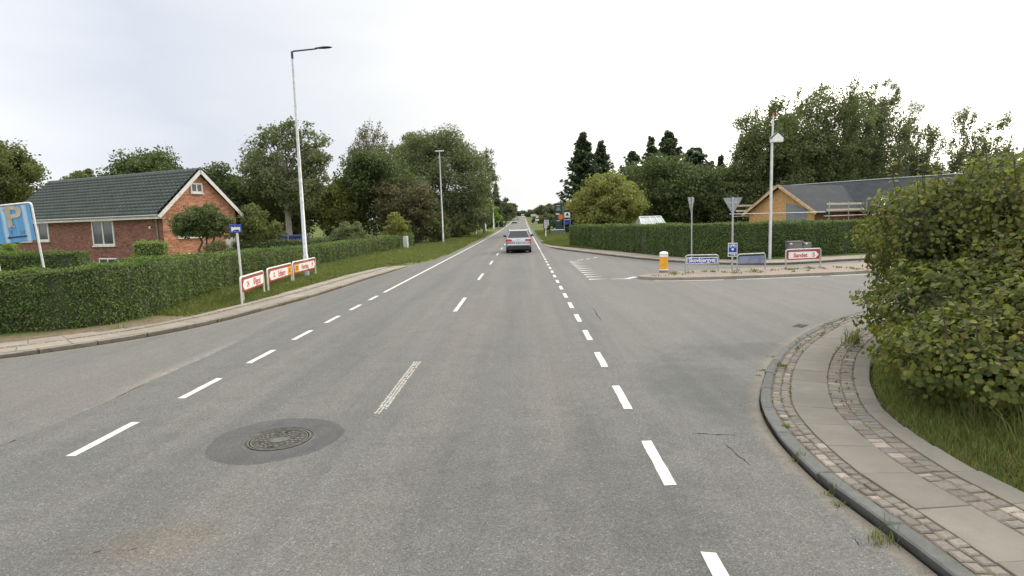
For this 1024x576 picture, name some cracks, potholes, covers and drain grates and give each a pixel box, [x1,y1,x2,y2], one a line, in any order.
manhole cover [242,427,316,452]
crack [694,433,750,465]
